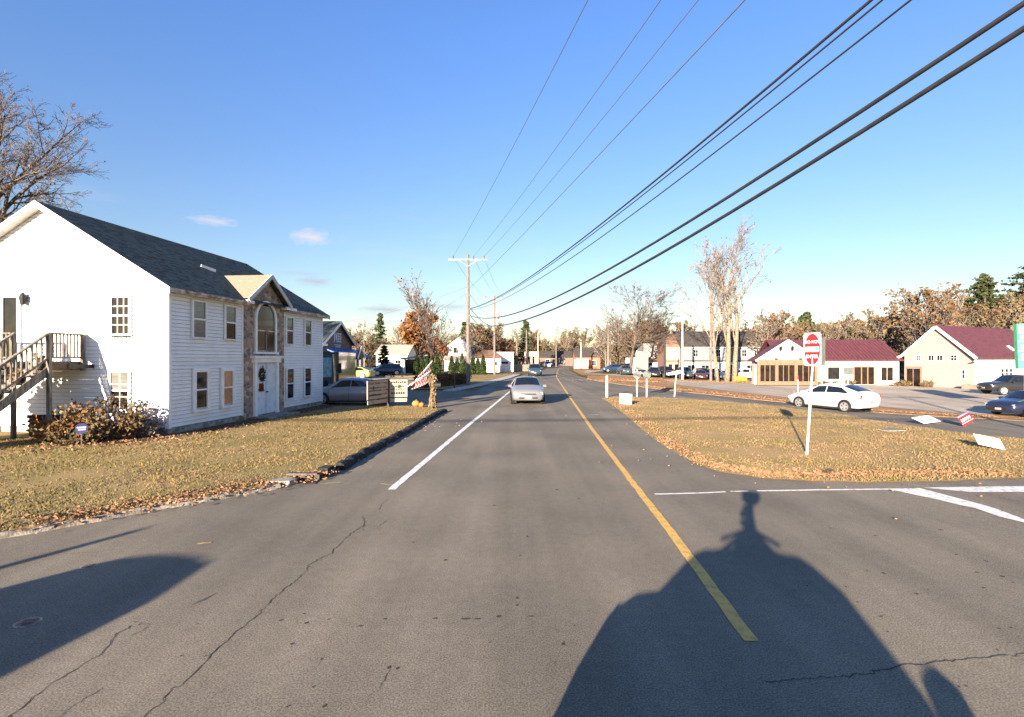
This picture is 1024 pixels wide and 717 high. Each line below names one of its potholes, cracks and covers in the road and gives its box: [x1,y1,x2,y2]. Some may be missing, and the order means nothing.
crack [8,621,145,717]
manhole cover [12,617,43,628]
crack [766,653,1024,683]
crack [143,500,387,717]
